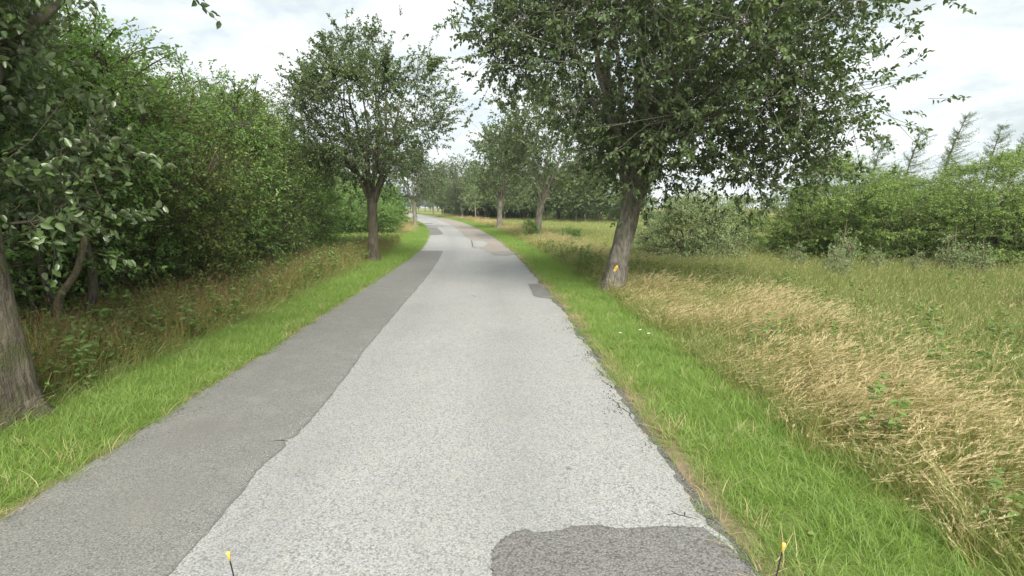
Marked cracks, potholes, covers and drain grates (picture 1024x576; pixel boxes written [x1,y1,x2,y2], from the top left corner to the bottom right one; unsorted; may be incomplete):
crack [667,511,696,519]
crack [574,333,633,419]
